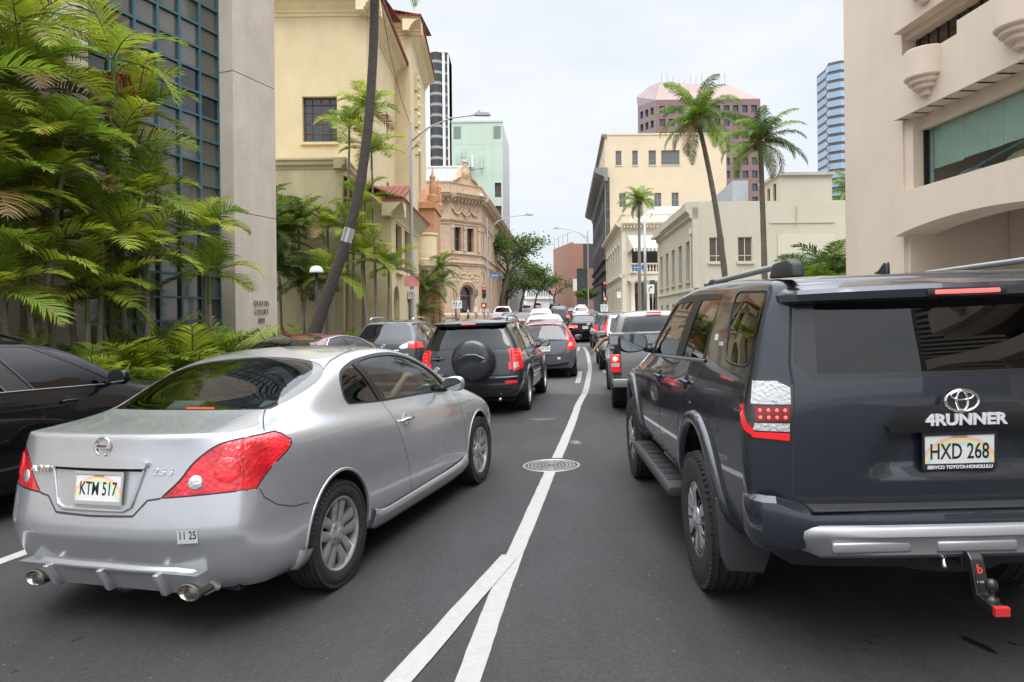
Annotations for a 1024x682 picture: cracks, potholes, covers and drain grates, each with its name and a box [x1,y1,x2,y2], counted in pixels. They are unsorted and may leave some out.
manhole cover [522,459,580,472]
